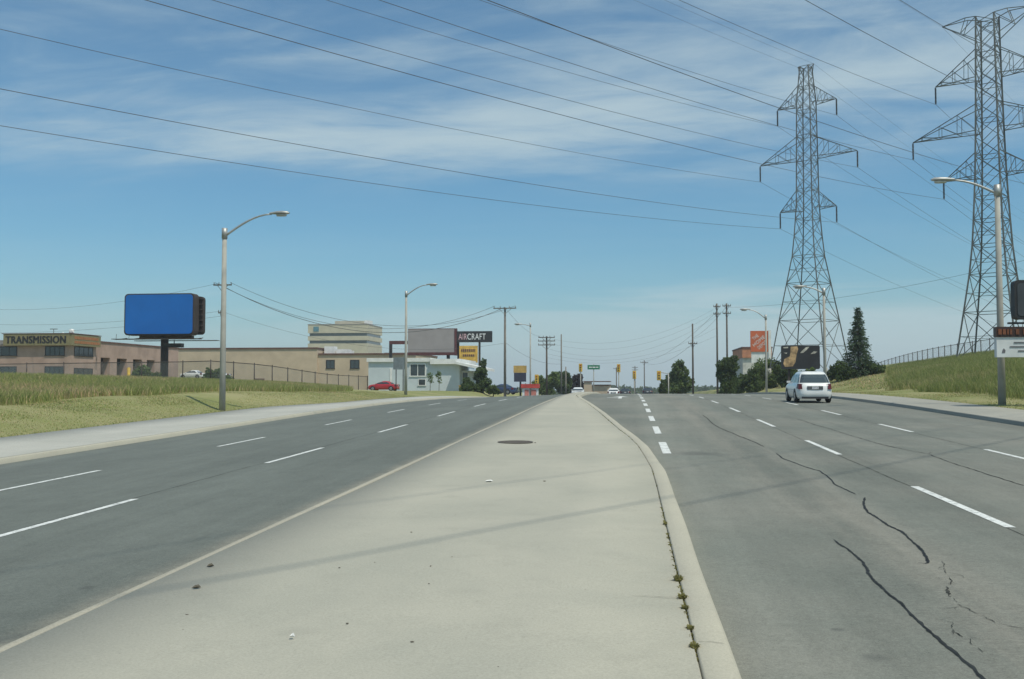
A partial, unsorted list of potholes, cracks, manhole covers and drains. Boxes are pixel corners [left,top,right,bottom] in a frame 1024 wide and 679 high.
crack [798,419,1021,485]
crack [703,415,855,494]
crack [936,563,1024,652]
